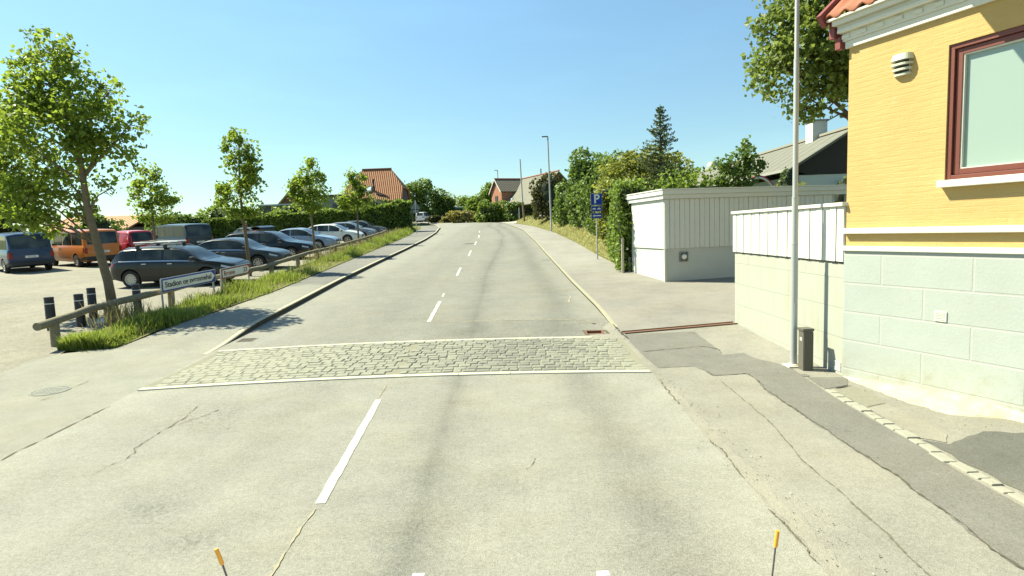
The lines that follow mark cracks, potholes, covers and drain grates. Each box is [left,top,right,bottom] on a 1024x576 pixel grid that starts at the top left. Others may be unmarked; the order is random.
crack [707,371,1024,569]
crack [659,379,818,563]
manhole cover [29,386,72,396]
crack [92,407,219,475]
